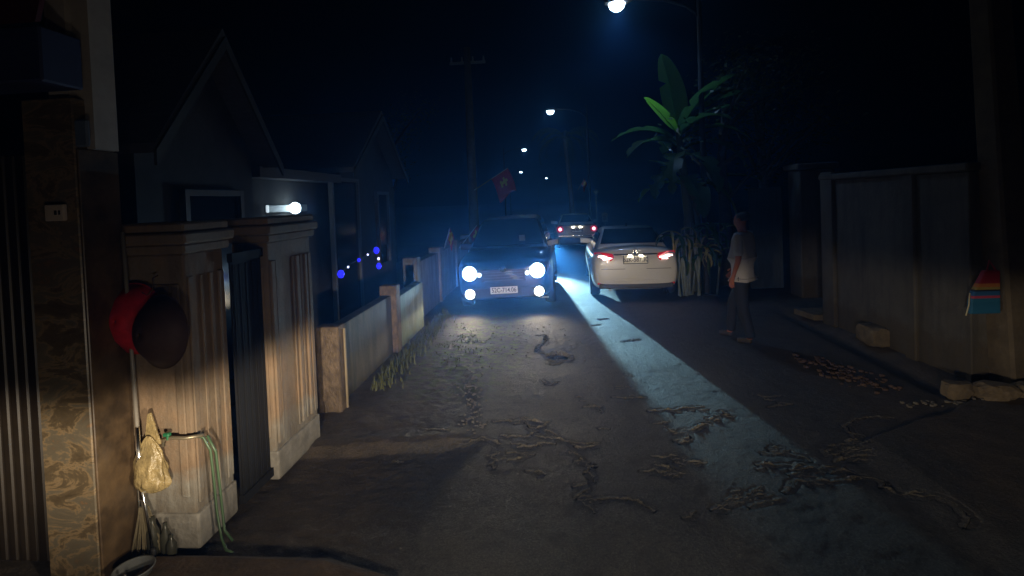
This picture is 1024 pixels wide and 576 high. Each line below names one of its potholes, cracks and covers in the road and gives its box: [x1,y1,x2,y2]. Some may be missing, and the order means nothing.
crack [680,415,980,530]
crack [391,334,796,514]
